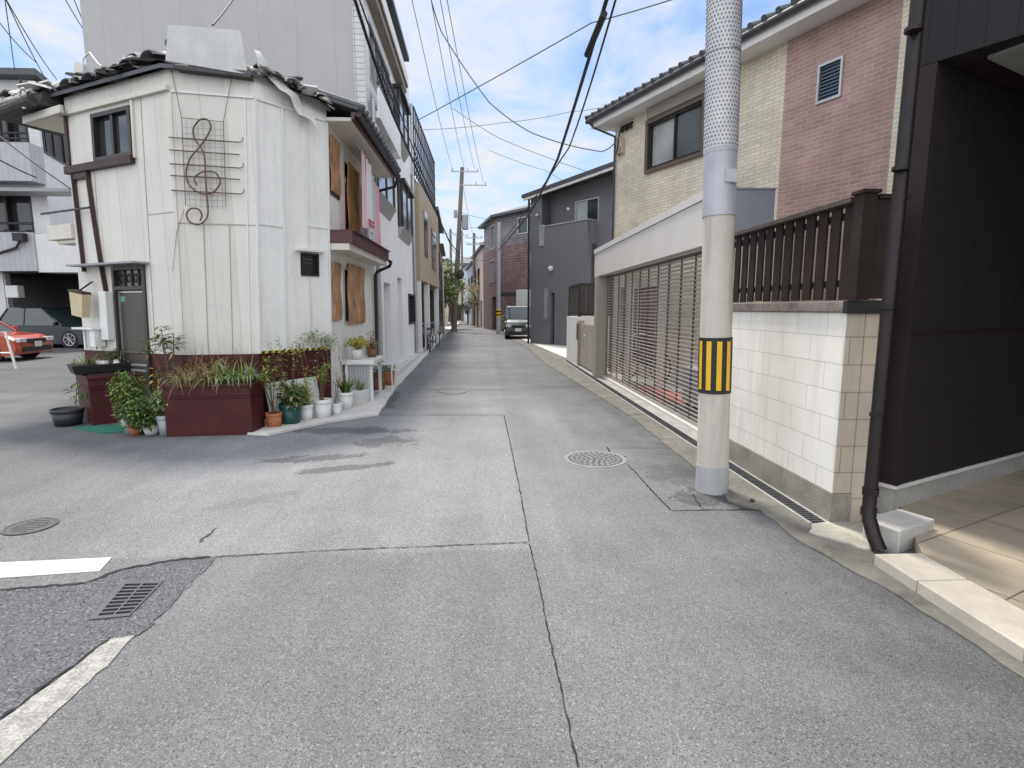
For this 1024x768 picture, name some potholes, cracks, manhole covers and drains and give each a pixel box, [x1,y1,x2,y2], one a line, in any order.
manhole cover [564,451,627,468]
manhole cover [0,517,59,536]
crack [0,415,579,768]
drain grate [89,580,164,620]
